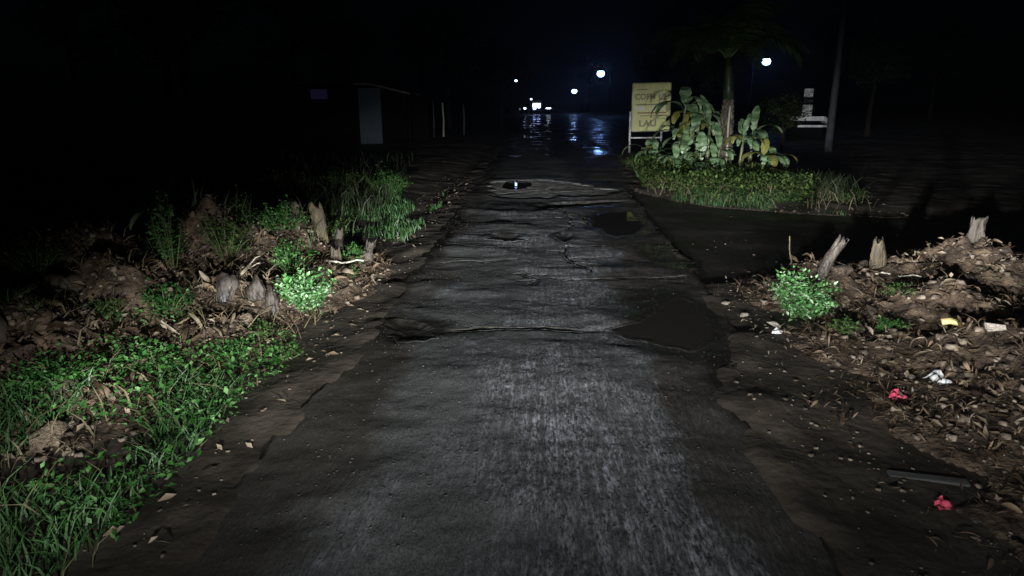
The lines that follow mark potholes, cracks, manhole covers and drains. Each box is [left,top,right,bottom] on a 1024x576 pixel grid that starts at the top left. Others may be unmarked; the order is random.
crack [442,210,688,285]
crack [452,325,589,333]
pothole [586,210,647,238]
pothole [474,178,633,200]
pothole [604,295,720,352]
